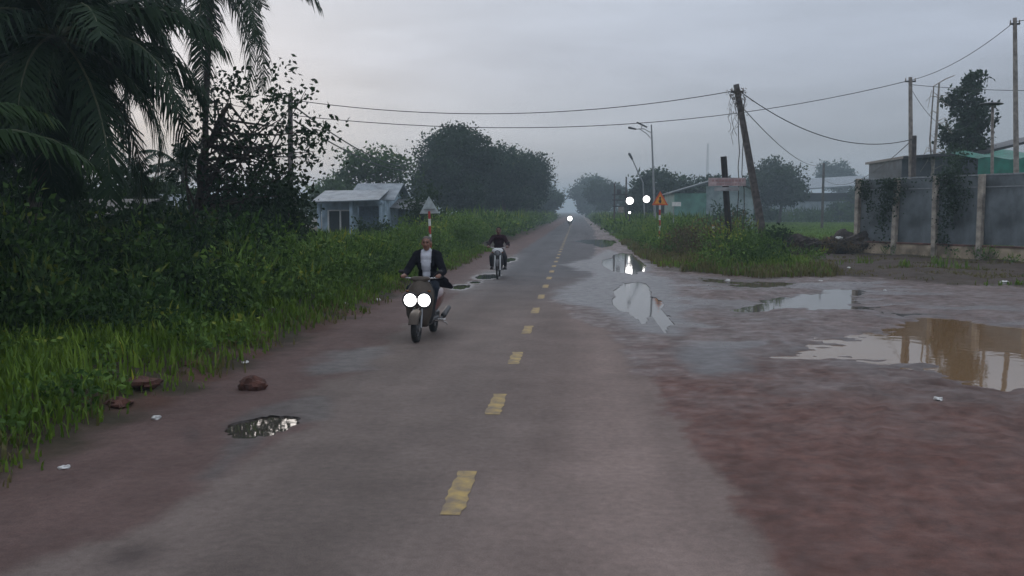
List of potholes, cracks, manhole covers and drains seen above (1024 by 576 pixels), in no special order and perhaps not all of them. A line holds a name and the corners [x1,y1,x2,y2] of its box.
pothole [223,415,301,439]
